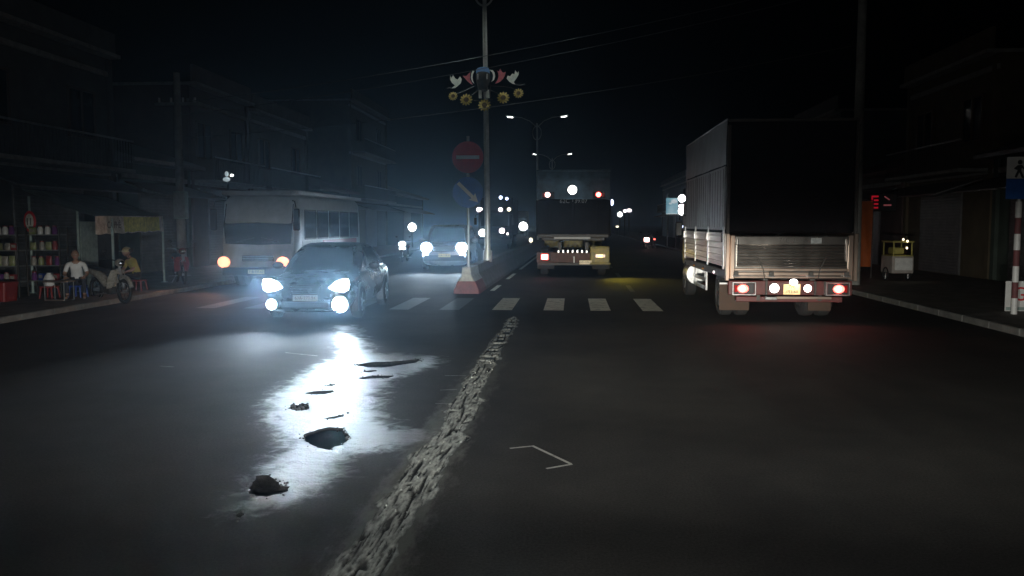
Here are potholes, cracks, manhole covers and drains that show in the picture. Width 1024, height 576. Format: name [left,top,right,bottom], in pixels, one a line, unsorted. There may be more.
pothole [241,473,289,499]
pothole [299,427,351,450]
crack [323,316,520,576]
pothole [285,403,309,411]
pothole [354,358,424,368]
